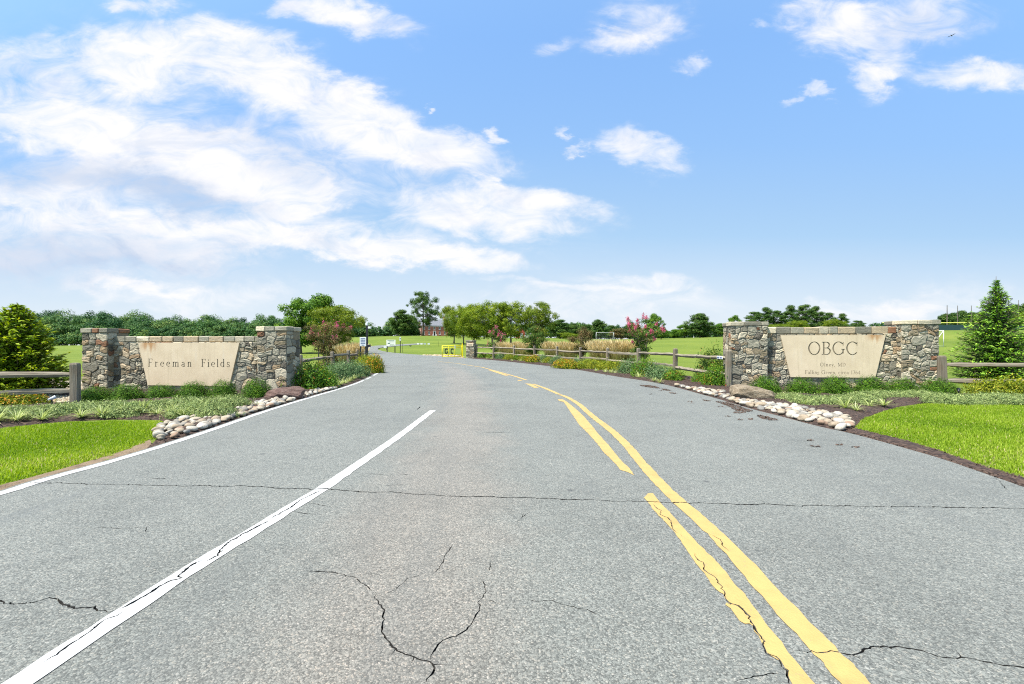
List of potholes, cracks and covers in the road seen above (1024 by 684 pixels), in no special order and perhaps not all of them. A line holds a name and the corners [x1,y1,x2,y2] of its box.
crack [314,546,496,681]
crack [0,478,1024,655]
